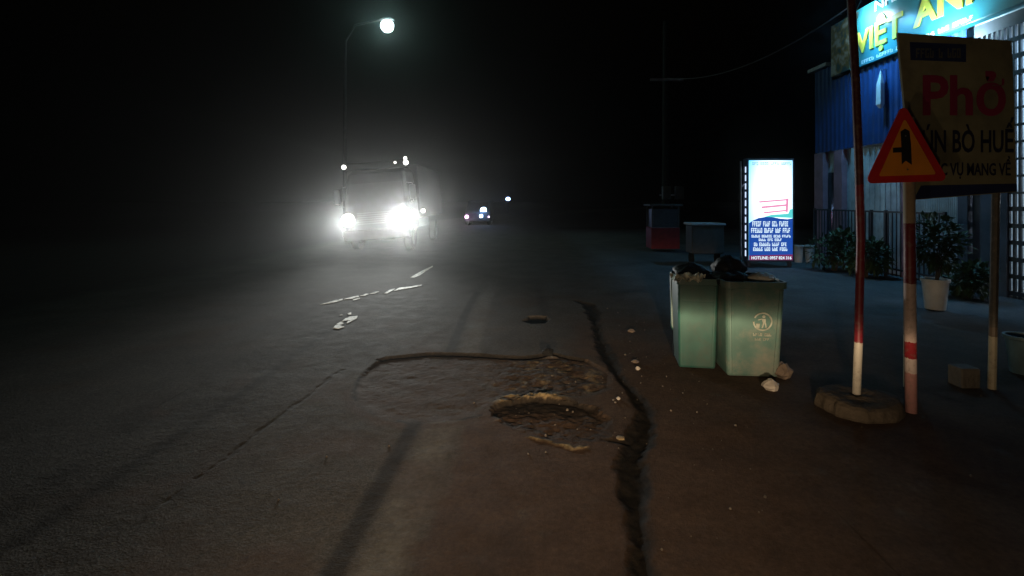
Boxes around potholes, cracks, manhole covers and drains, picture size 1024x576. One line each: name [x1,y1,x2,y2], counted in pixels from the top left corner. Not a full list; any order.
pothole [489,395,618,449]
crack [132,369,346,528]
crack [375,300,660,576]
